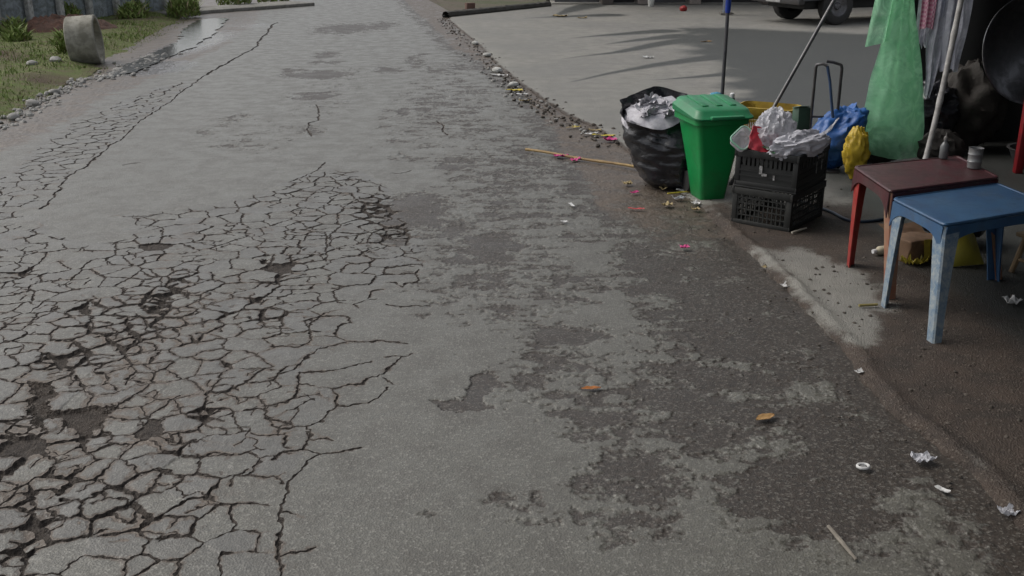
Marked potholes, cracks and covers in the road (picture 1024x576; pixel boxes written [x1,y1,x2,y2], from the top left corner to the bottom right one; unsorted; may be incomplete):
crack [0,22,279,209]
crack [0,162,430,576]
crack [306,104,320,136]
pothole [24,381,120,440]
